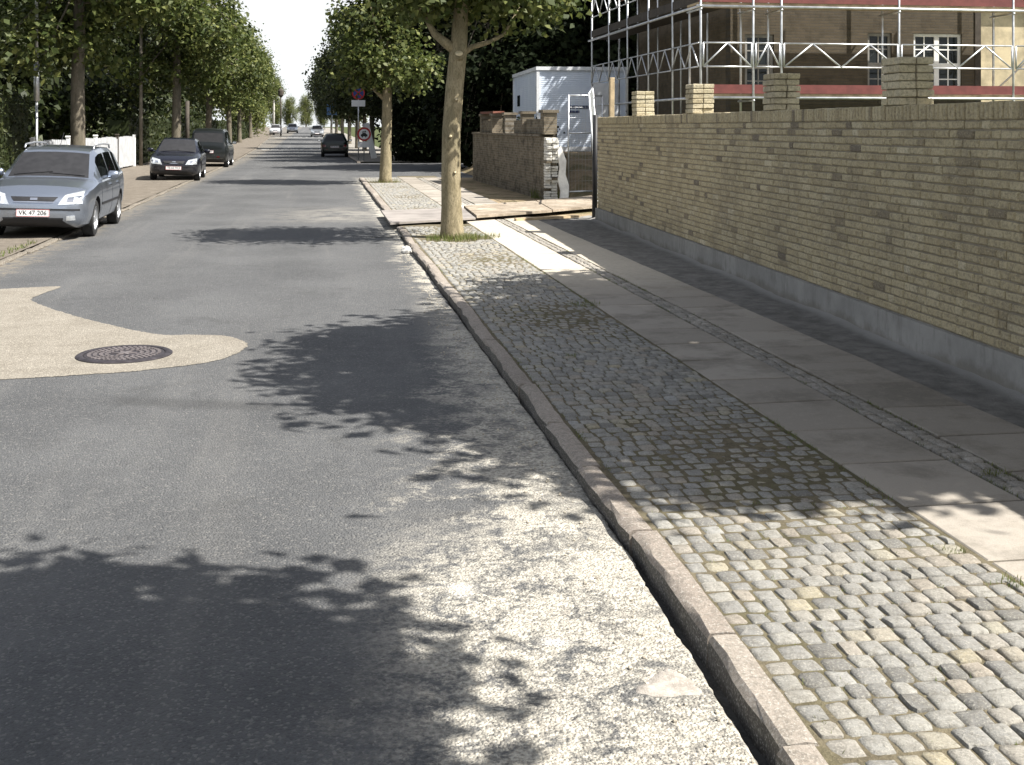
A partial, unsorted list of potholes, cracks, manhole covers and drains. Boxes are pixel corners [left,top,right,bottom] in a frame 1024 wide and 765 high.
manhole cover [75,345,173,364]
